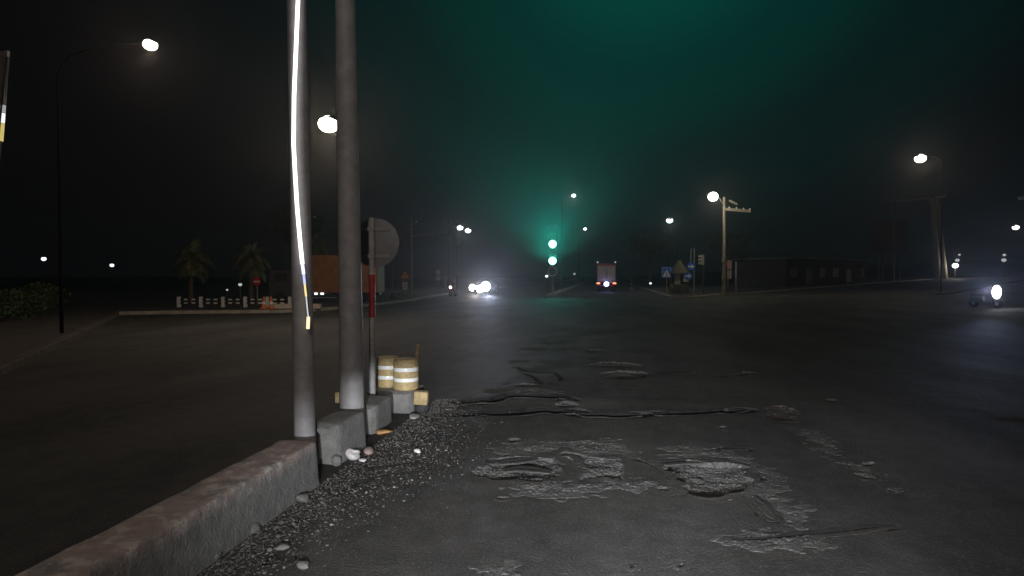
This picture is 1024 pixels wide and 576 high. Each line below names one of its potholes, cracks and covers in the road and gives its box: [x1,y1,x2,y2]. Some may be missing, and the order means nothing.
pothole [551,446,631,483]
crack [722,473,898,543]
pothole [463,454,584,484]
pothole [593,370,654,381]
pothole [639,455,763,500]
pothole [757,405,807,423]
crack [429,367,749,419]
pothole [585,361,648,369]
